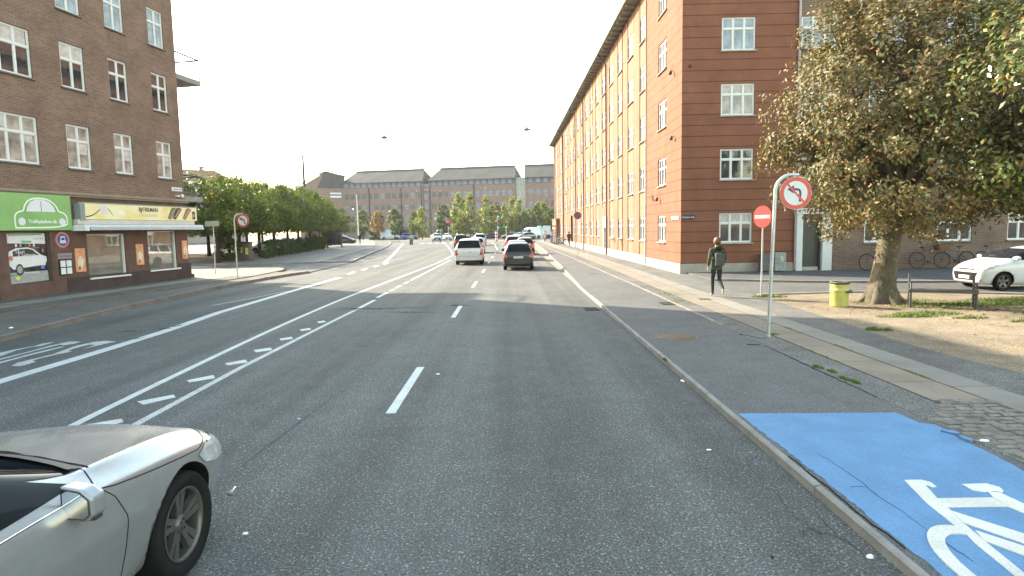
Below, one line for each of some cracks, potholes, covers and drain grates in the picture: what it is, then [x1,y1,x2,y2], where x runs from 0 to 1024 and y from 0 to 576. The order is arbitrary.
manhole cover [656,333,699,341]
crack [819,454,972,561]
crack [777,492,869,563]
